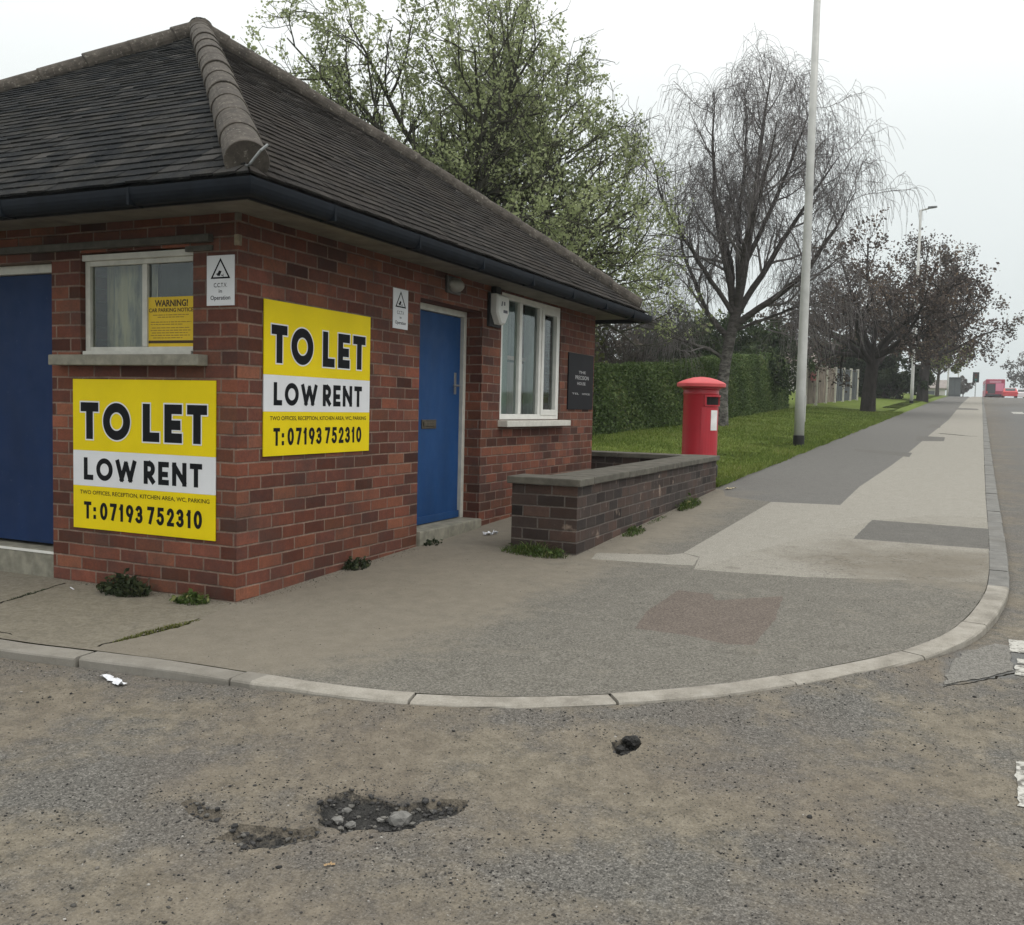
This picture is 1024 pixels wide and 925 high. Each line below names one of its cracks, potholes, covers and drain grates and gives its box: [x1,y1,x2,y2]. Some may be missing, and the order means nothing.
pothole [314,789,469,833]
pothole [216,823,320,850]
pothole [181,798,227,823]
